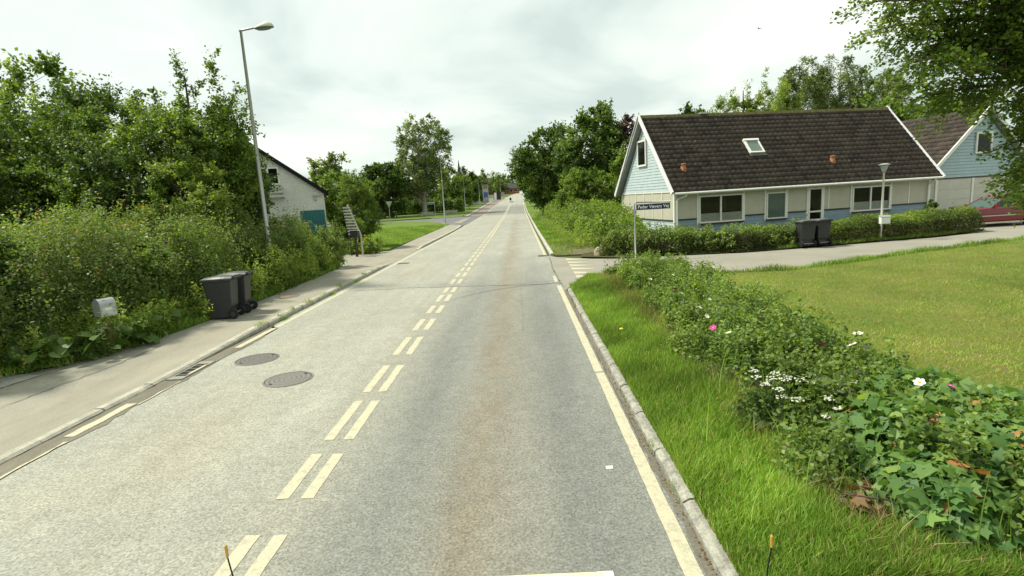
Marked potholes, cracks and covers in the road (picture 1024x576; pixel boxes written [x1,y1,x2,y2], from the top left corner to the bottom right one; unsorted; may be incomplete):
drain grate [166,361,216,381]
manhole cover [262,371,314,388]
manhole cover [234,353,280,366]
